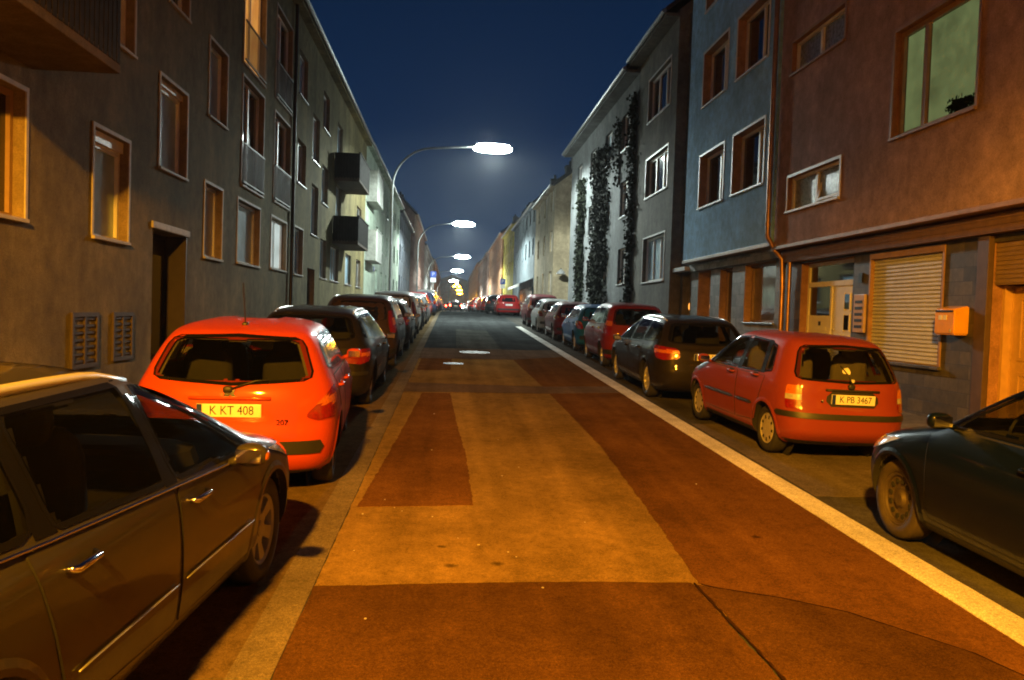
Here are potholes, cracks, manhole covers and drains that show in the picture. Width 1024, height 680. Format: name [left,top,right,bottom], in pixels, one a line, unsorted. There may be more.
crack [701,584,1024,676]
